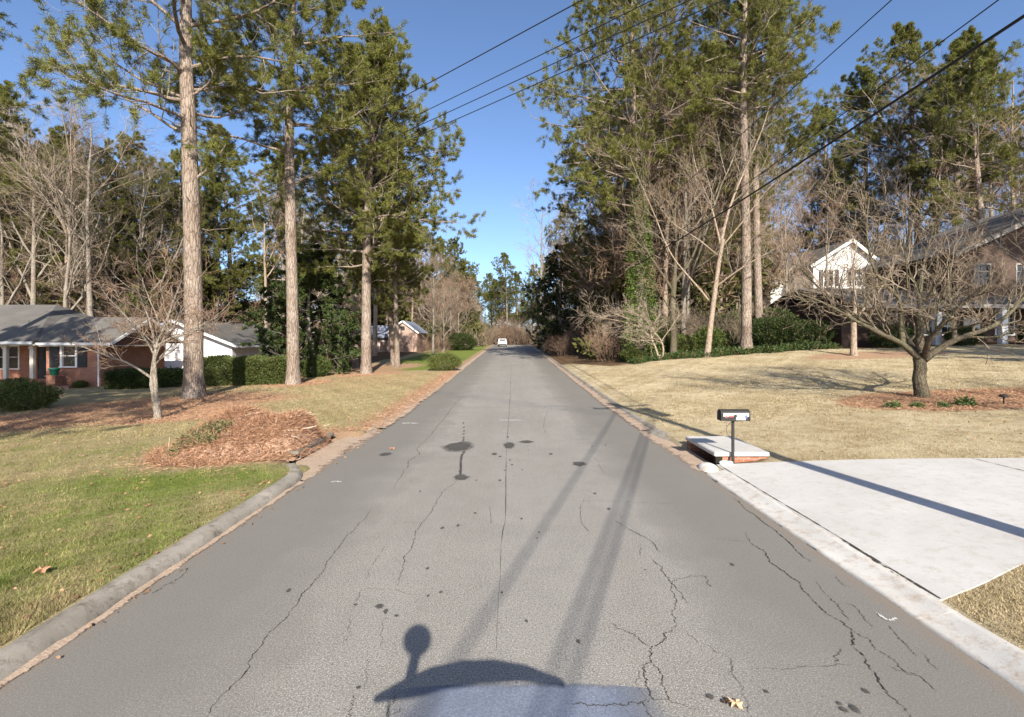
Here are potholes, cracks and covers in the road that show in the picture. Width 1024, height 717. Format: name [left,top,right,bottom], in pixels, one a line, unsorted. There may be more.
crack [341,481,456,644]
crack [209,509,373,713]
crack [348,615,387,717]
crack [570,501,936,716]
